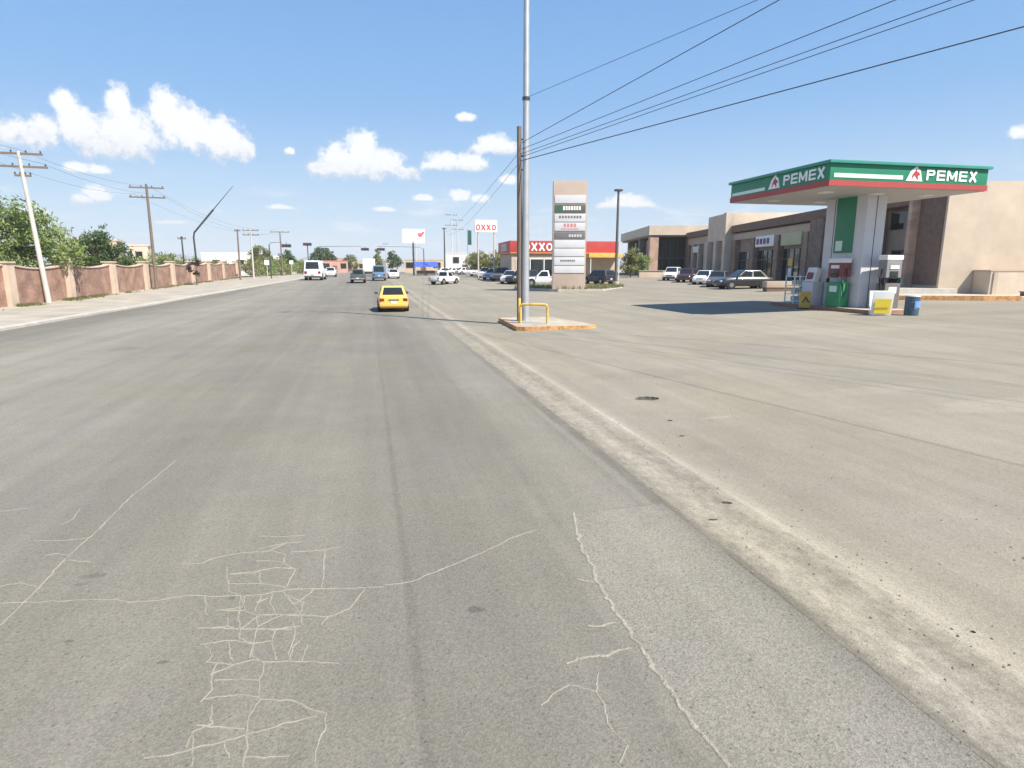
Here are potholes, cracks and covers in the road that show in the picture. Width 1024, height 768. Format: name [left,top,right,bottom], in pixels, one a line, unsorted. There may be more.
crack [0,460,535,768]
crack [541,504,732,768]
